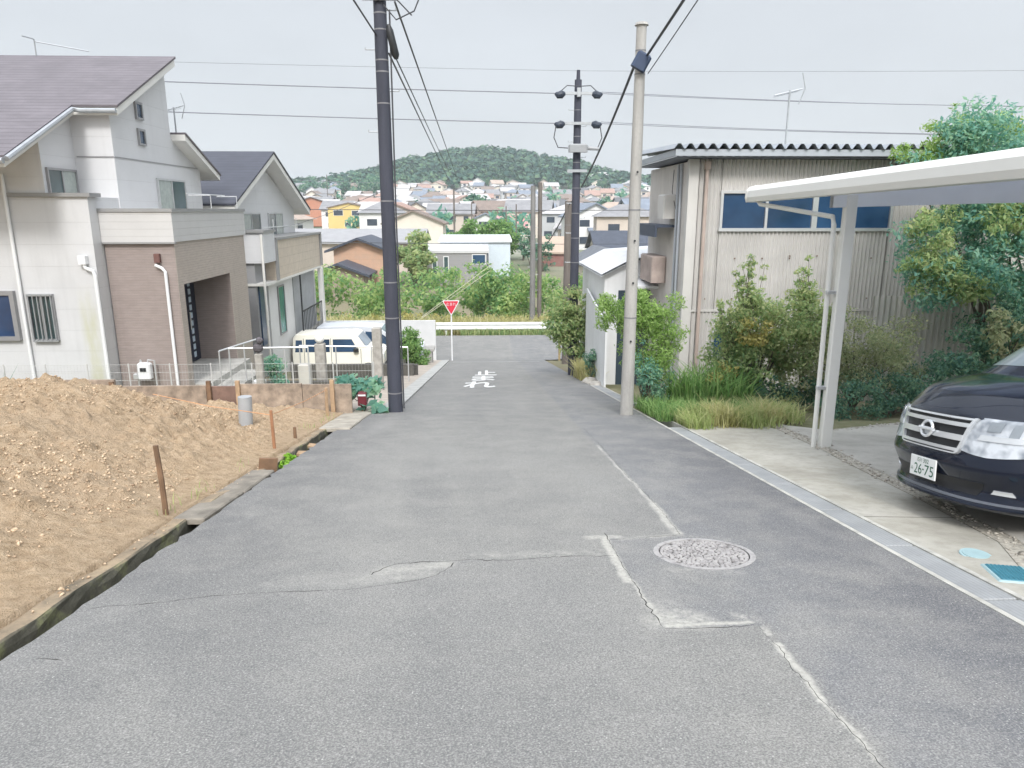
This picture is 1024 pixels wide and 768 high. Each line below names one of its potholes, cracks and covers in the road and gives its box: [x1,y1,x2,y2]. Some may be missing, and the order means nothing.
utility cover [959,548,991,559]
crack [89,556,600,610]
manhole cover [653,538,756,570]
